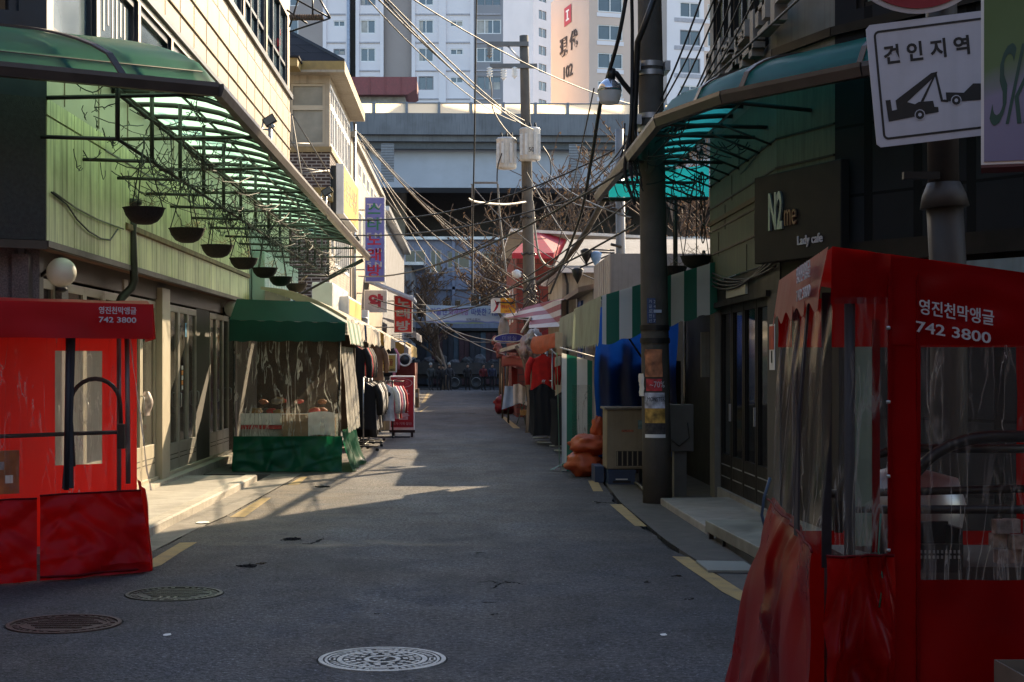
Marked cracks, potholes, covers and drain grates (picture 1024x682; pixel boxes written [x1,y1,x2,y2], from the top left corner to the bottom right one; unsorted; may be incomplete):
manhole cover [124,586,225,602]
crack [594,482,679,553]
manhole cover [316,647,448,673]
crack [477,581,520,615]
manhole cover [3,614,124,634]
